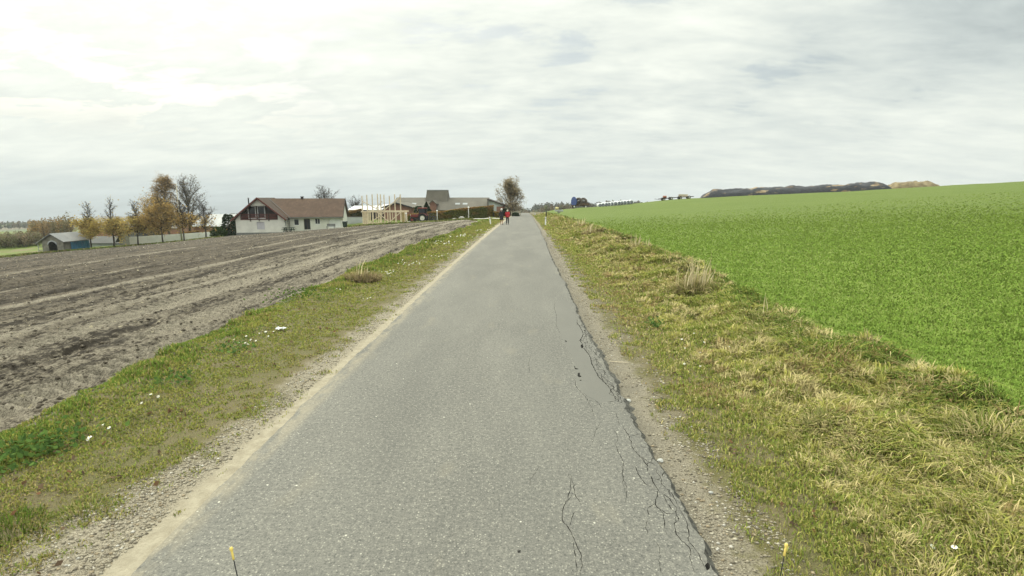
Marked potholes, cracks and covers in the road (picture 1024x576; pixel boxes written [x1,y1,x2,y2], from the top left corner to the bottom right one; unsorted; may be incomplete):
crack [562,474,583,576]
crack [575,320,704,570]
